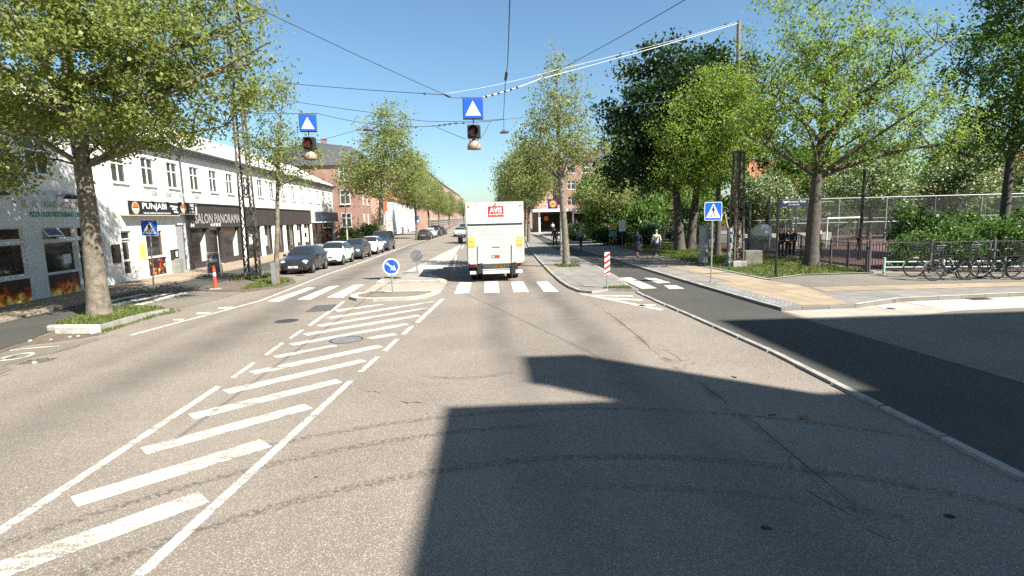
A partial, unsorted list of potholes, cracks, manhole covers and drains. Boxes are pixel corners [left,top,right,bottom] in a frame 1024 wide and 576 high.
manhole cover [329,336,364,344]
